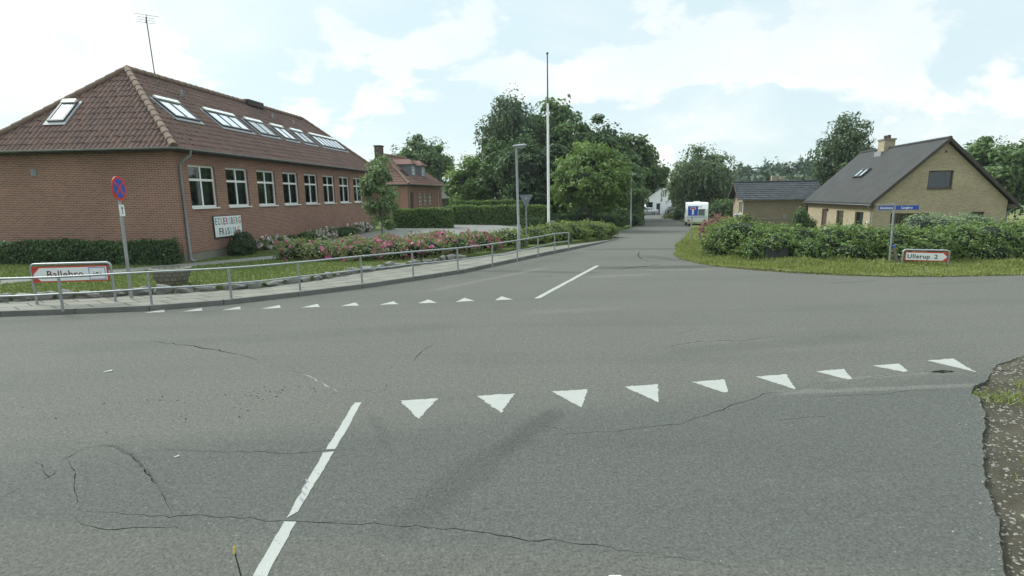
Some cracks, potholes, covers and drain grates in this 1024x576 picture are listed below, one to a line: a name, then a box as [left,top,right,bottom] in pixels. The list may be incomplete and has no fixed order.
crack [11,441,773,576]
crack [521,377,868,437]
